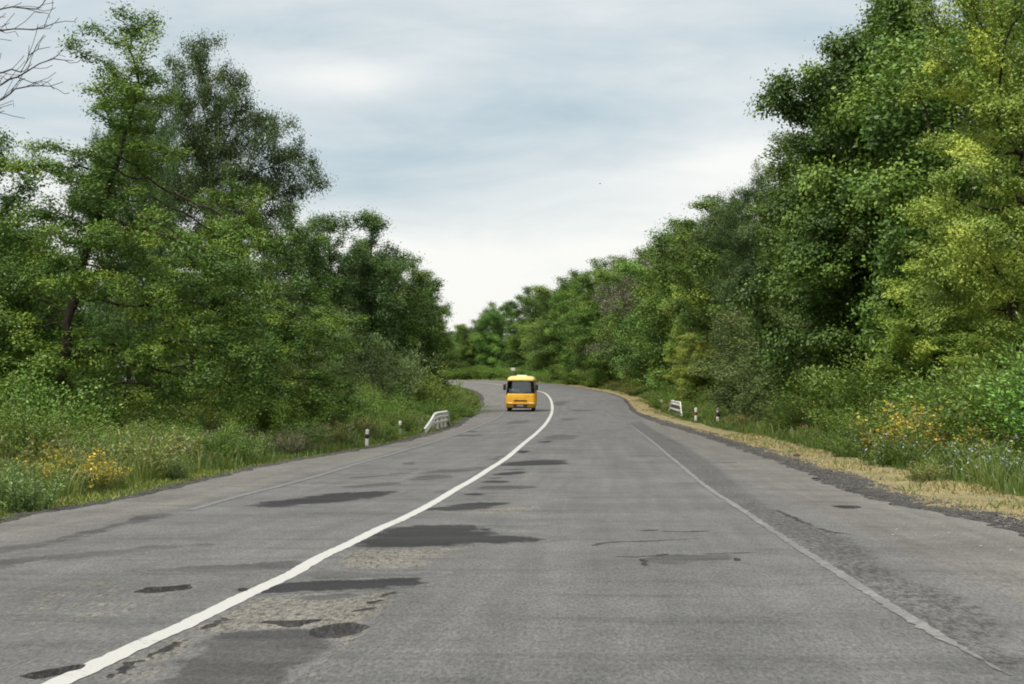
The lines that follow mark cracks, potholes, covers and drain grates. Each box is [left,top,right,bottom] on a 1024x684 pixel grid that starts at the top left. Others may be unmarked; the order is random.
pothole [309,623,371,638]
pothole [134,584,192,593]
pothole [20,664,85,679]
